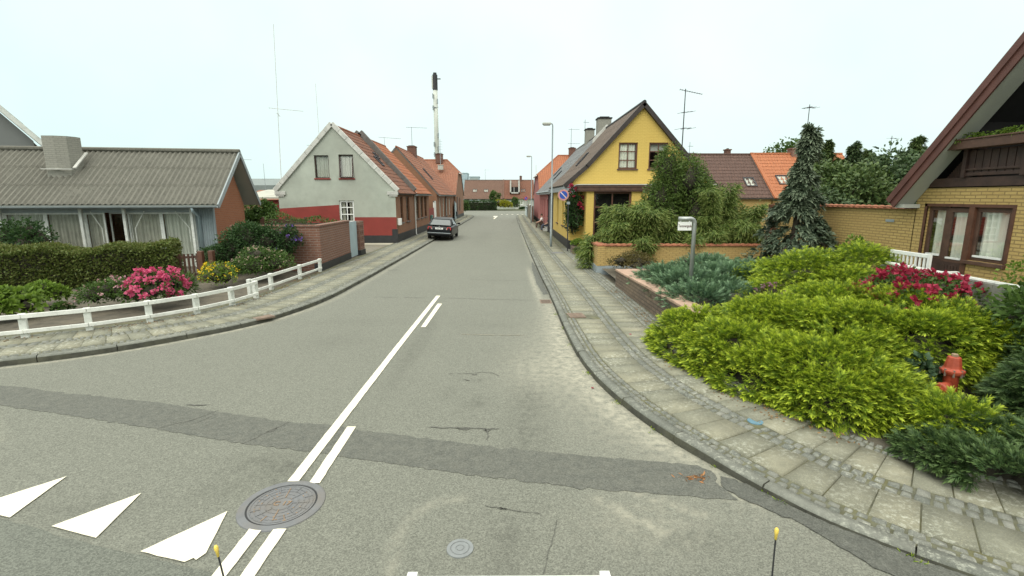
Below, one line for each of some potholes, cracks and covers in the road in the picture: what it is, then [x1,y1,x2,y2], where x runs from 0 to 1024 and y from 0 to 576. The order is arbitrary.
manhole cover [236,481,326,532]
crack [432,426,499,441]
manhole cover [447,539,474,559]
